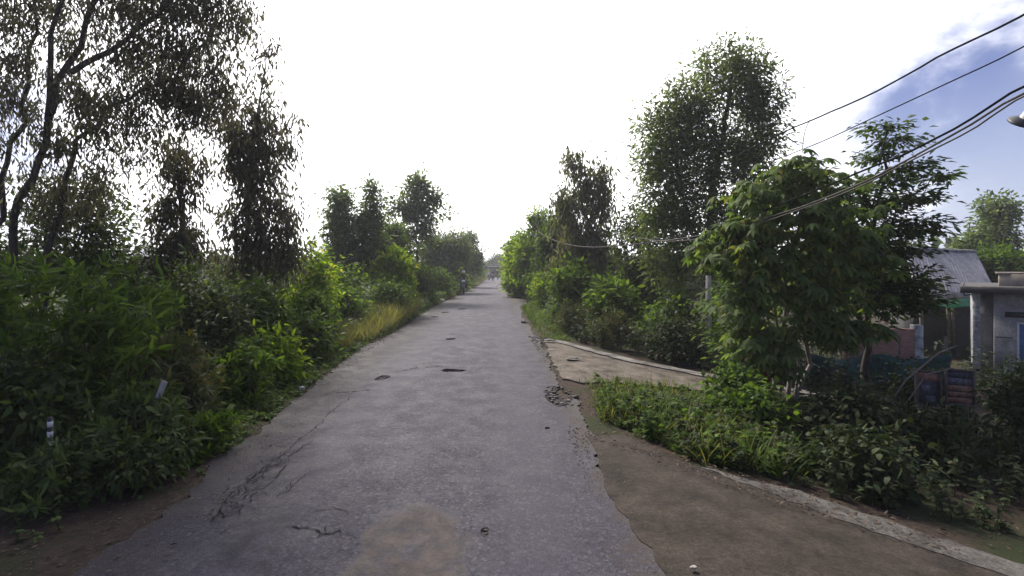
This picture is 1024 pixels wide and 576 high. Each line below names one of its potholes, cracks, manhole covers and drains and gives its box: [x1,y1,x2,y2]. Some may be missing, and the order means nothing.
crack [282,506,355,537]
crack [204,398,349,534]
pothole [543,386,579,408]
